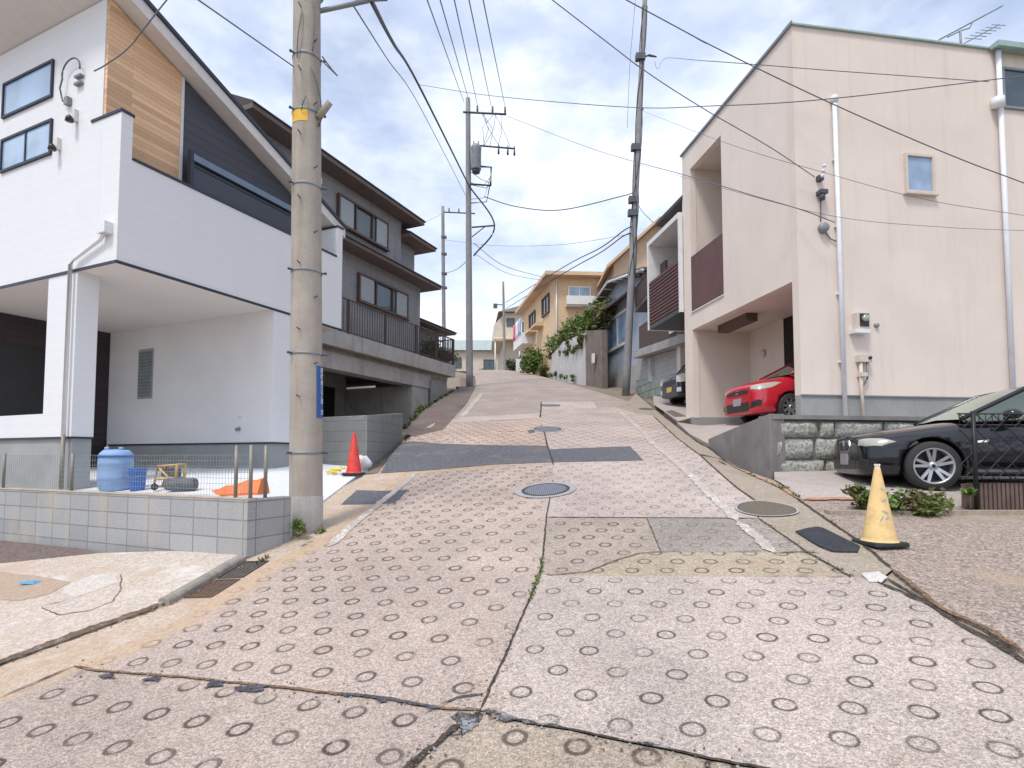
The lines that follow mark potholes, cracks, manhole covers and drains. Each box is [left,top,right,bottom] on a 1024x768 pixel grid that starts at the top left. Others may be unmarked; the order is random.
crack [41,575,122,615]
pothole [451,711,483,736]
crack [74,402,771,768]
drain grate [217,560,269,579]
manhole cover [515,482,576,498]
drain grate [184,579,241,599]
manhole cover [735,500,799,516]
